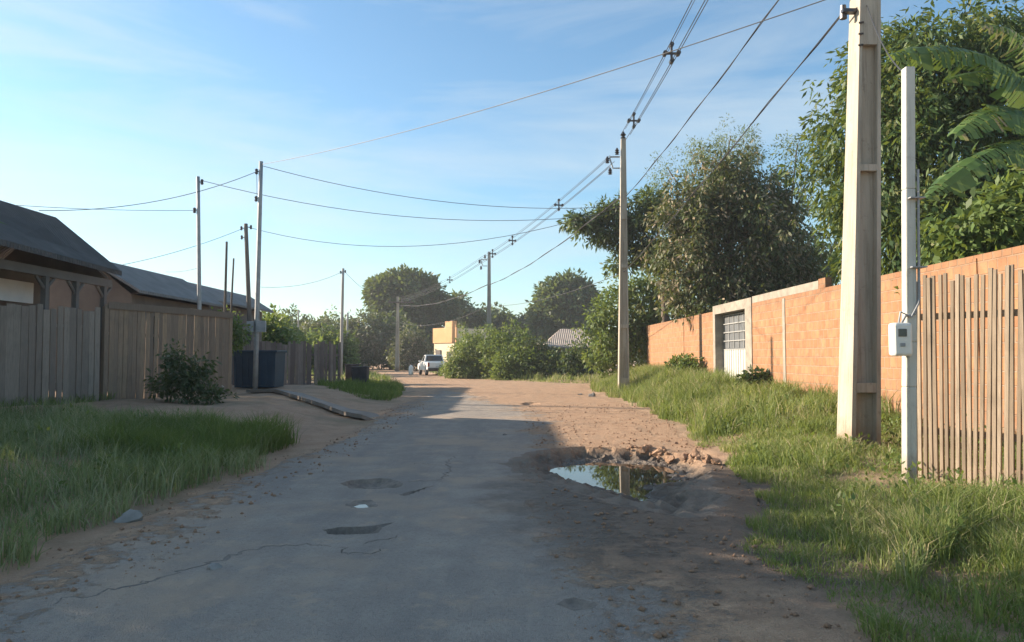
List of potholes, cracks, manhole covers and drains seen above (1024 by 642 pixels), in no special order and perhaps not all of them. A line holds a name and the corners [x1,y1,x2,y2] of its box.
pothole [324,522,394,535]
crack [55,535,397,604]
pothole [498,446,732,518]
pothole [340,478,403,489]
pothole [345,500,378,508]
crack [399,456,454,496]
